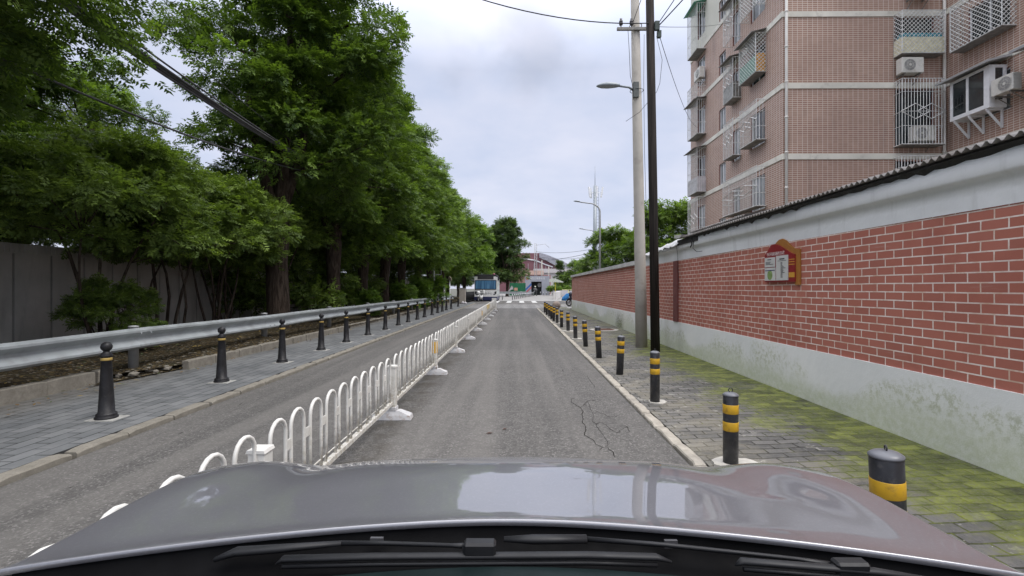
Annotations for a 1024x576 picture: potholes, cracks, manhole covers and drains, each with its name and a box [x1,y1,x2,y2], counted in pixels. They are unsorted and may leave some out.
crack [562,369,630,457]
